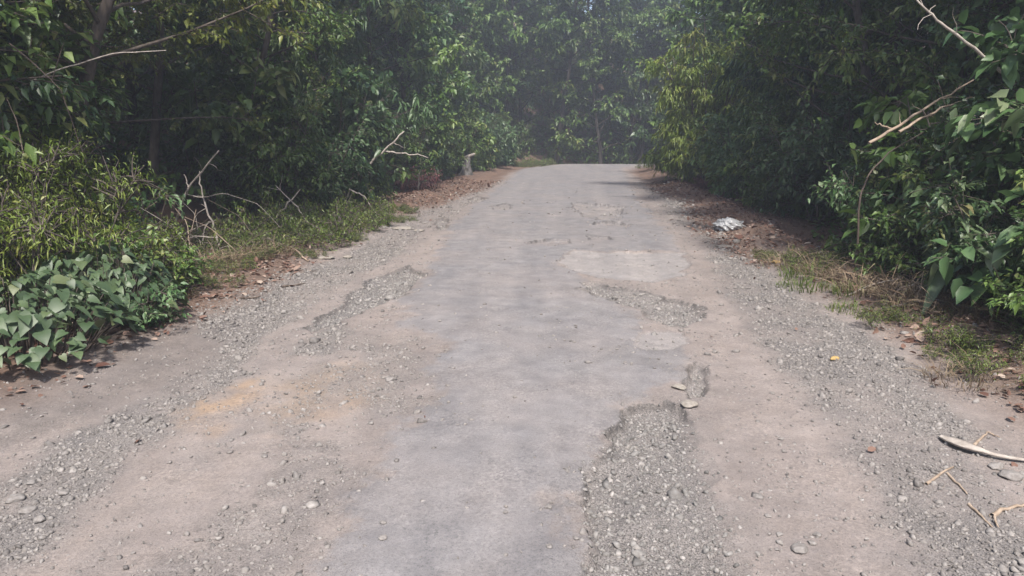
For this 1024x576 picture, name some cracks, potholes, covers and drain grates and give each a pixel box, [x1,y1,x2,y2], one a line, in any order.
pothole [573,400,754,576]
pothole [680,361,712,399]
pothole [574,282,707,328]
pothole [303,265,430,332]
